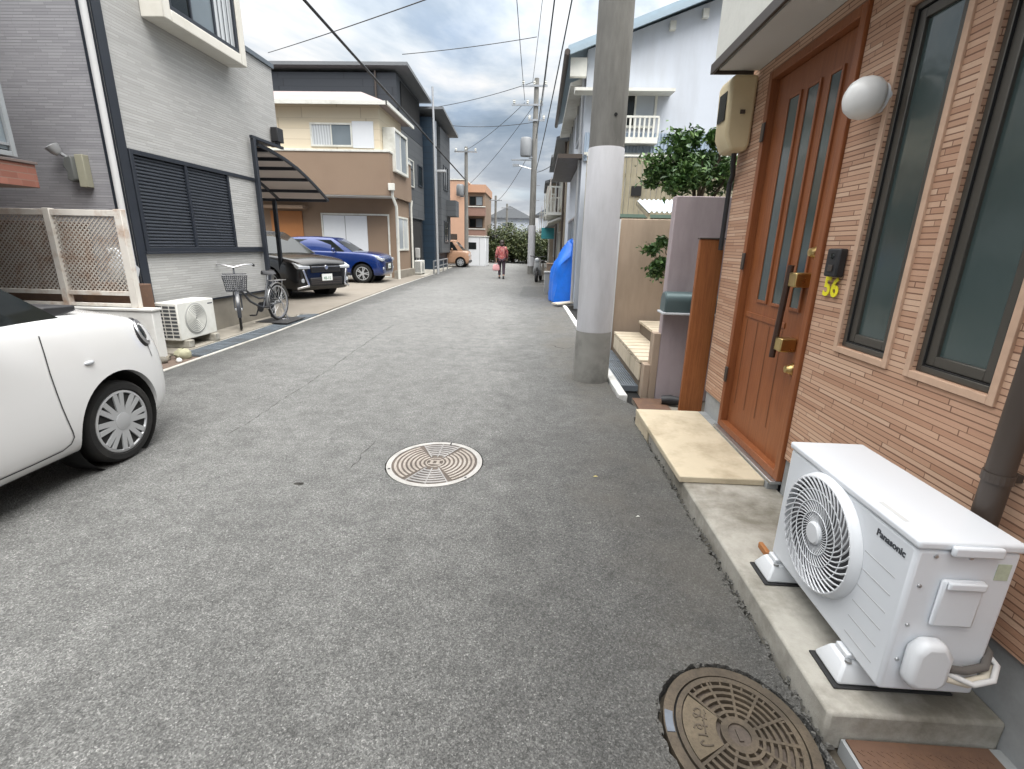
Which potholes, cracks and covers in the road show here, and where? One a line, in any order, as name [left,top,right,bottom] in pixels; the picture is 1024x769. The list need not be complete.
drain grate [609,361,638,391]
drain grate [219,333,265,344]
crack [225,325,393,437]
drain grate [190,342,237,356]
manhole cover [662,667,825,769]
drain grate [248,325,287,334]
manhole cover [386,442,482,488]
